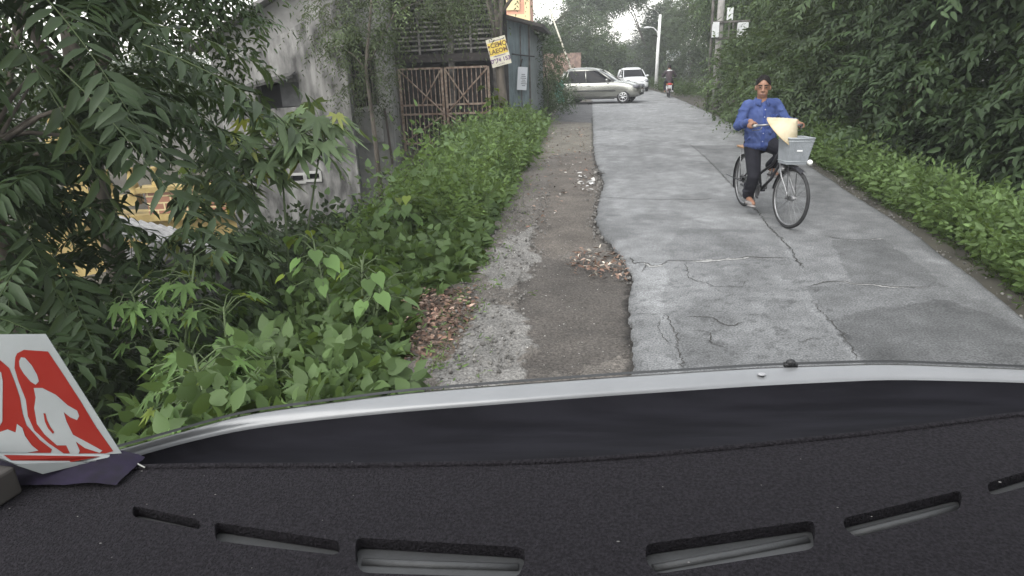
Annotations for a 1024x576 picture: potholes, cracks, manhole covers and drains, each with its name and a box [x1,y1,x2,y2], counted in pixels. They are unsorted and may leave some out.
crack [631,313,744,367]
crack [805,281,934,358]
crack [607,145,804,268]
